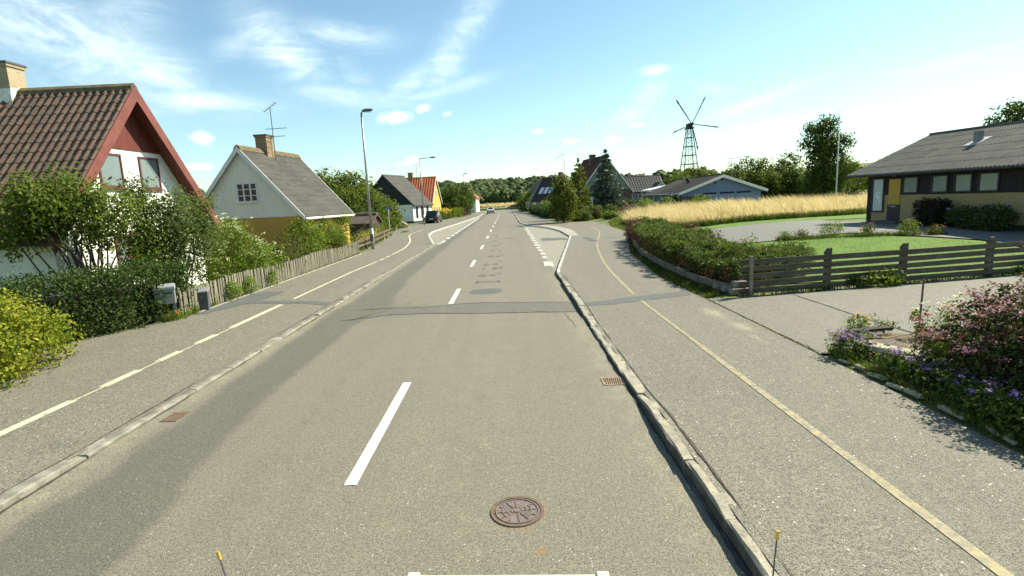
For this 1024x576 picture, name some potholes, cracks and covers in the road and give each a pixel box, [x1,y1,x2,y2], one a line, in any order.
drain grate [600,377,626,386]
drain grate [160,411,190,422]
manhole cover [491,496,544,527]
